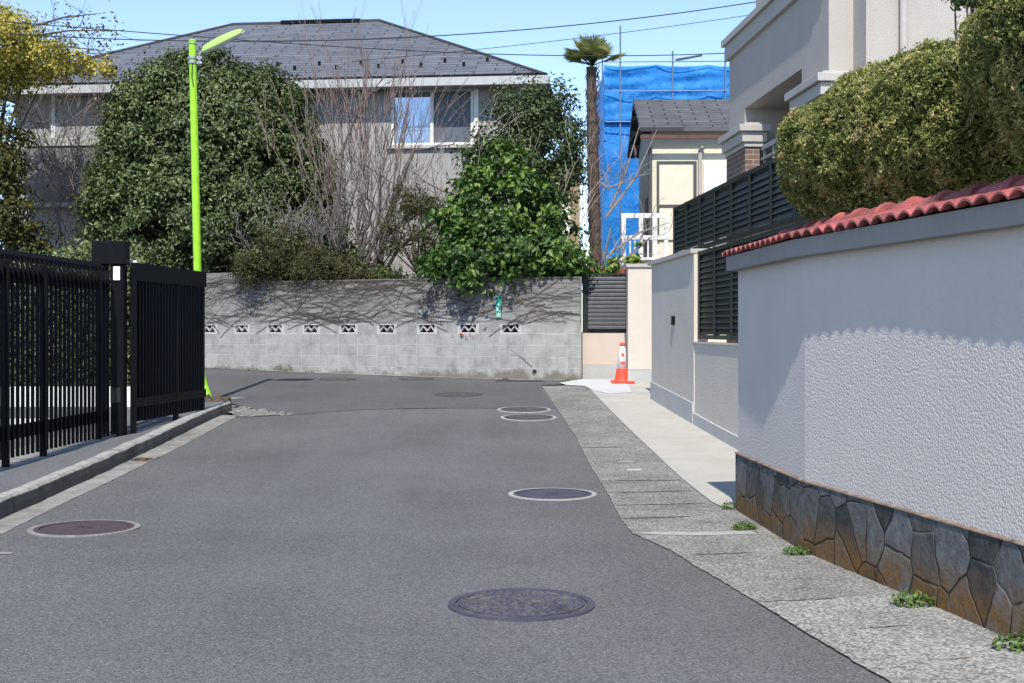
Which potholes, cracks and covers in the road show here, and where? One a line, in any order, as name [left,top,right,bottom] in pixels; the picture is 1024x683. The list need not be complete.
manhole cover [26,520,141,537]
manhole cover [448,588,595,622]
manhole cover [508,488,597,501]
